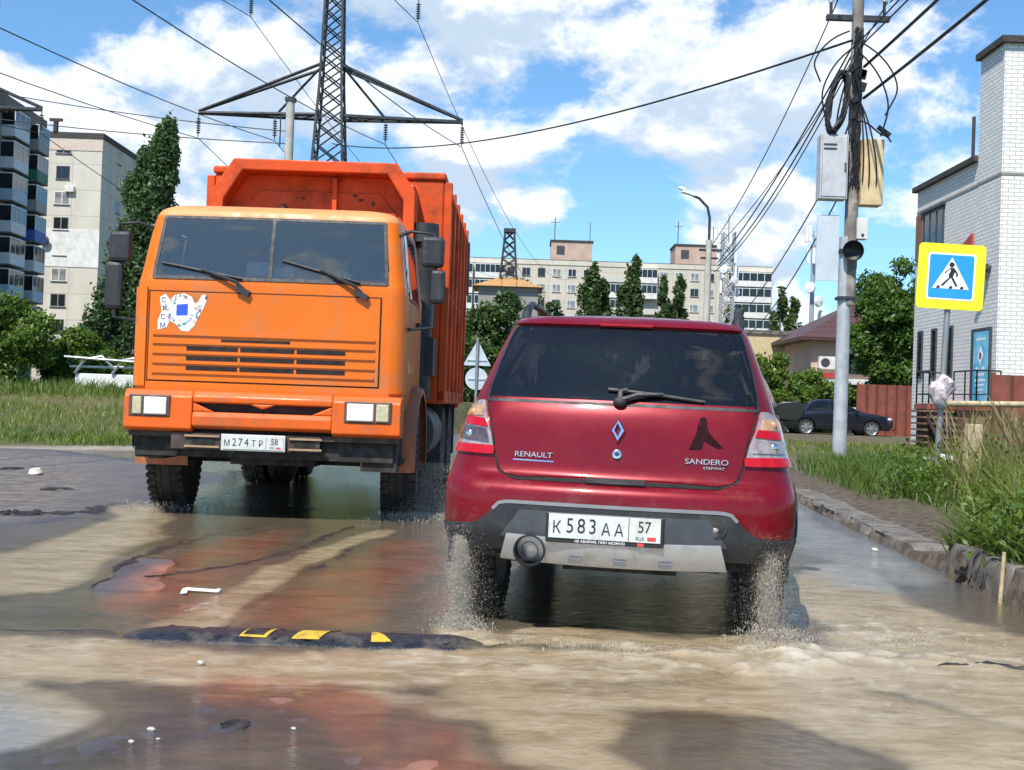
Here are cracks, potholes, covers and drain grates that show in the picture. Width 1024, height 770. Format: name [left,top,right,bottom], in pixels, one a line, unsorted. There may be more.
pothole [220,719,251,730]
crack [88,524,363,604]
pothole [0,509,45,517]
